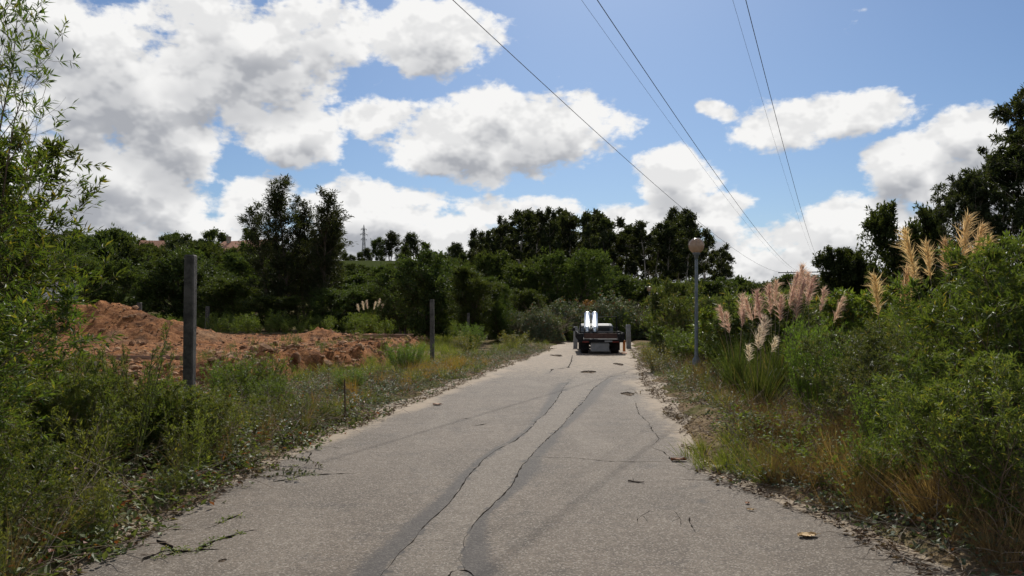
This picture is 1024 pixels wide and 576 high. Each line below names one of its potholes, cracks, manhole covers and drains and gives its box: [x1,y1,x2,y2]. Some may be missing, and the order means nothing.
crack [381,372,688,576]
